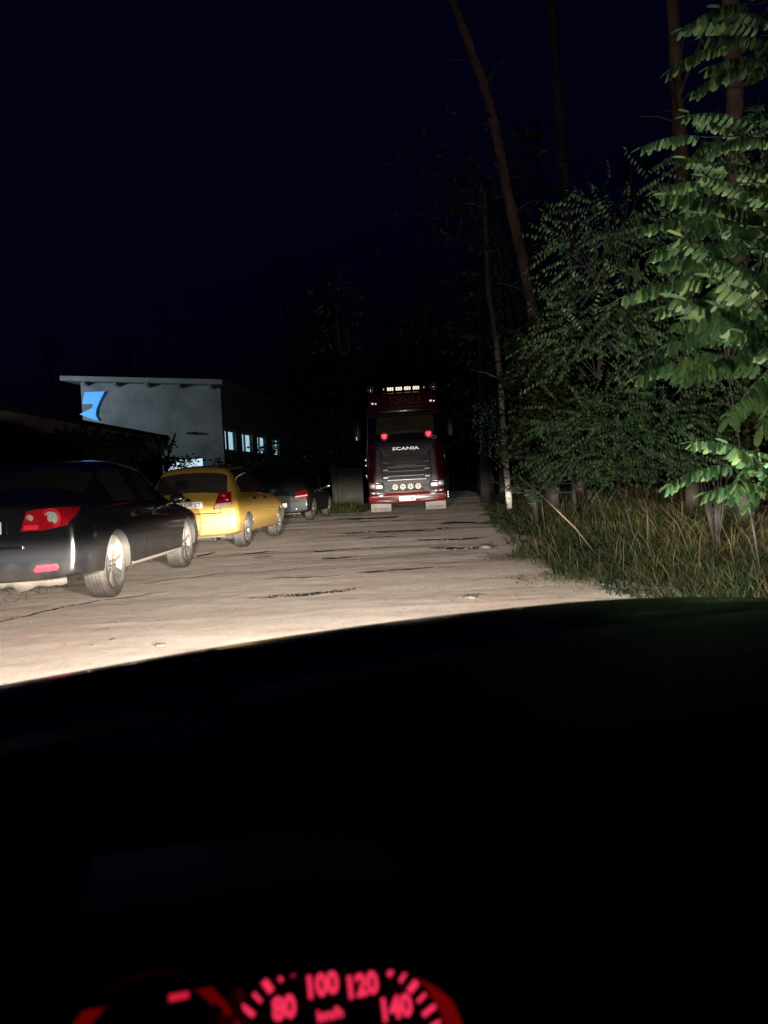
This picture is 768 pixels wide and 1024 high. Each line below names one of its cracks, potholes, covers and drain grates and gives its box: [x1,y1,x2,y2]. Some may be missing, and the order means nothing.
crack [1,551,278,622]
